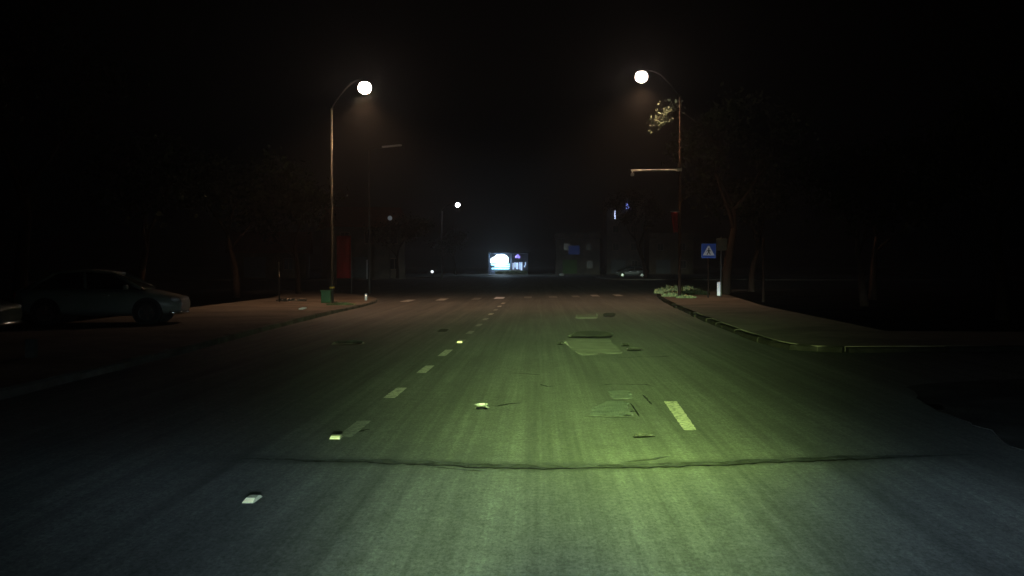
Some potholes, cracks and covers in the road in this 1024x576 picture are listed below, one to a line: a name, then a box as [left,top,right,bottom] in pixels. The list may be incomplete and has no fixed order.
crack [590,384,652,418]
crack [242,454,969,471]
